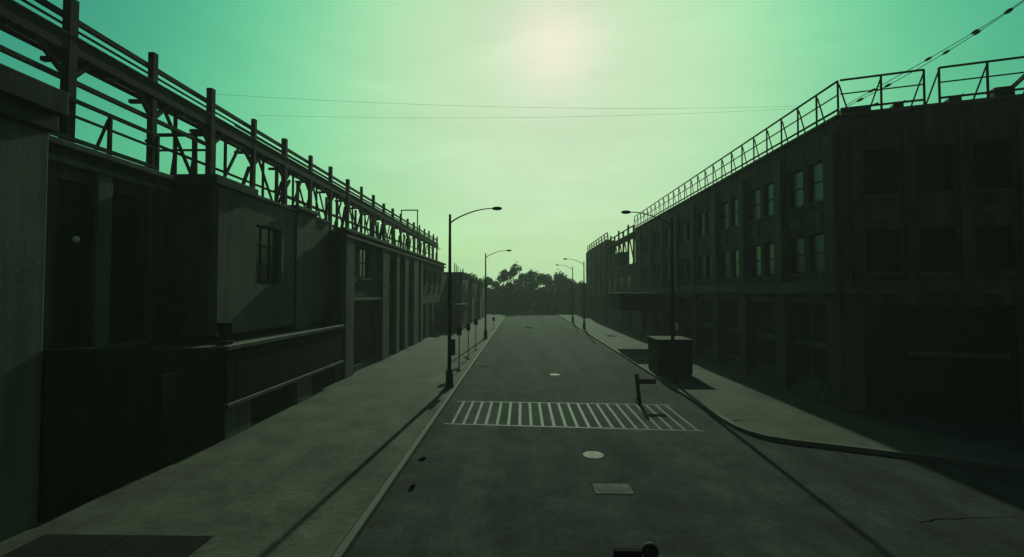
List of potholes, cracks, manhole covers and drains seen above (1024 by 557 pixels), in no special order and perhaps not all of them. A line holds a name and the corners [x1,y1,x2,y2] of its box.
utility cover [591,483,636,495]
manhole cover [582,451,605,459]
